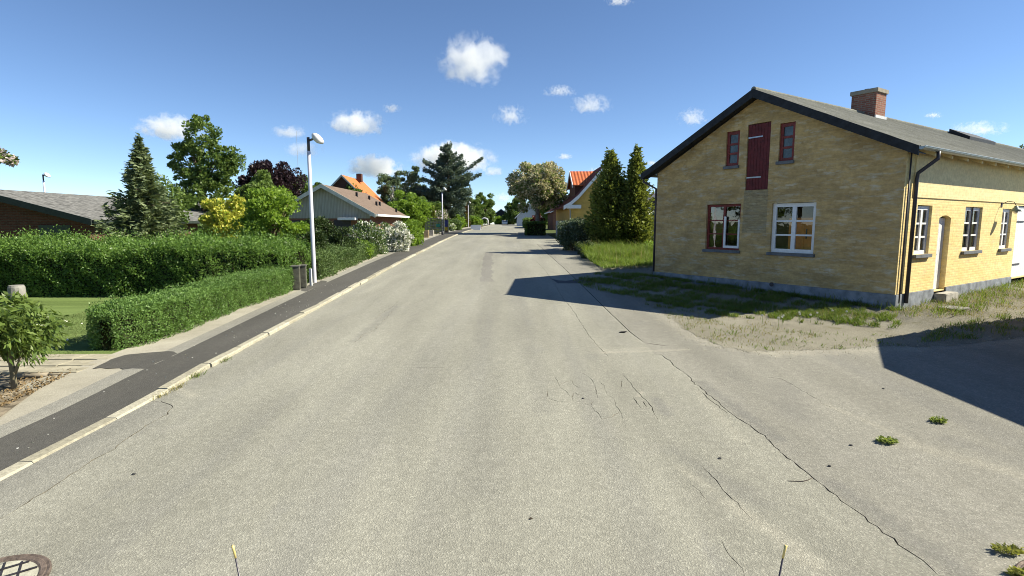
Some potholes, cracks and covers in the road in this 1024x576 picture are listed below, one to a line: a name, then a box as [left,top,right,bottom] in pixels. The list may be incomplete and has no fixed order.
crack [0,401,173,519]
crack [547,375,658,419]
crack [662,355,937,574]
